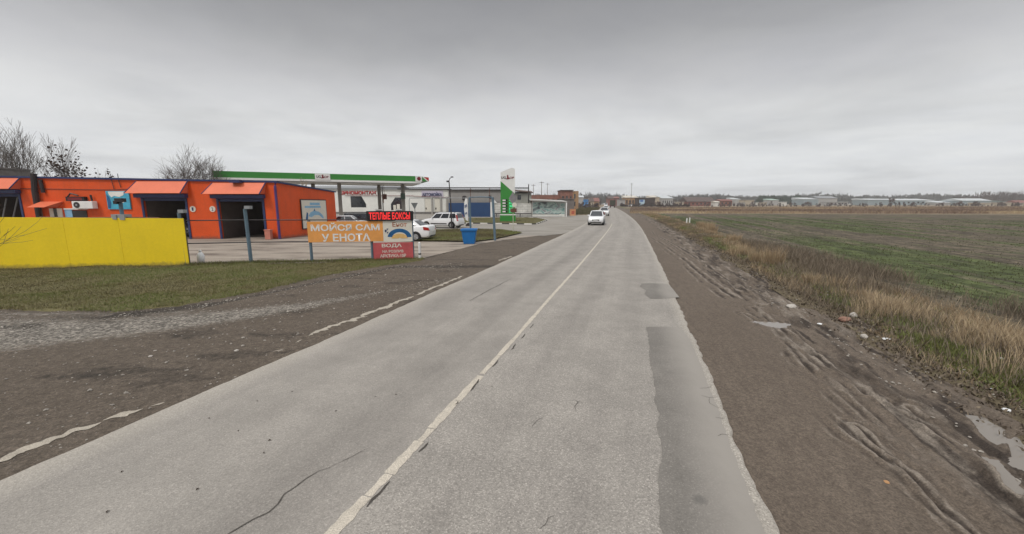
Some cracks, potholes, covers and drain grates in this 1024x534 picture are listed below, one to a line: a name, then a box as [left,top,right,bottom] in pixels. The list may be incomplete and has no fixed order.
crack [228,449,365,534]
